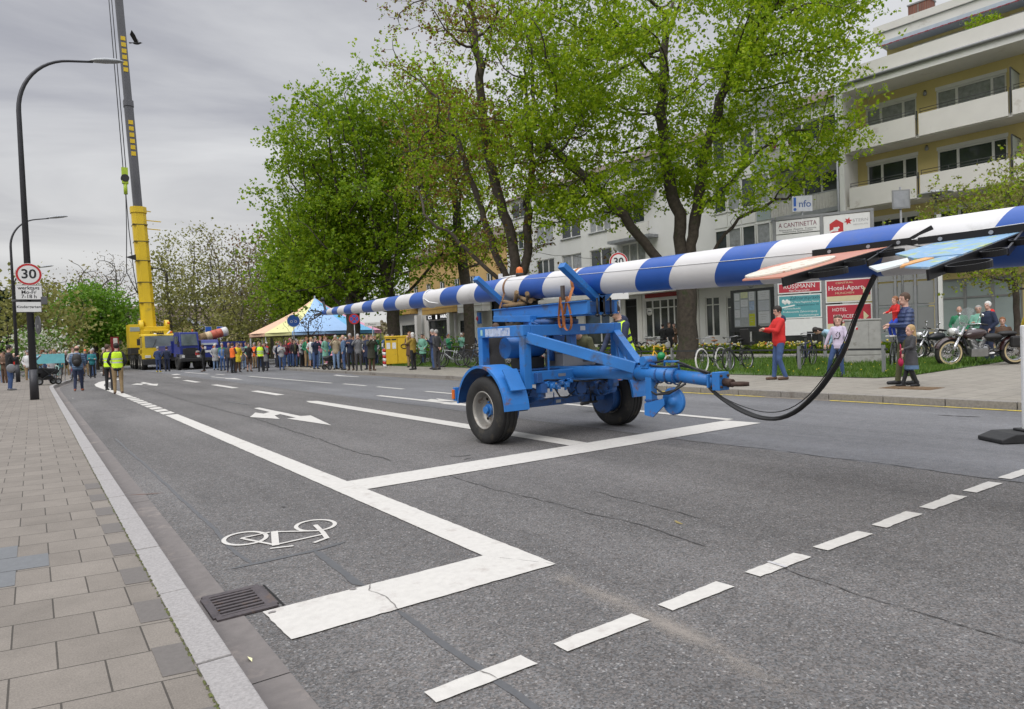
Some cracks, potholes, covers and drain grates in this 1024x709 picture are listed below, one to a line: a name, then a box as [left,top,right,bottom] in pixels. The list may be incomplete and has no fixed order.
drain grate [200,584,285,622]
crack [455,477,707,547]
